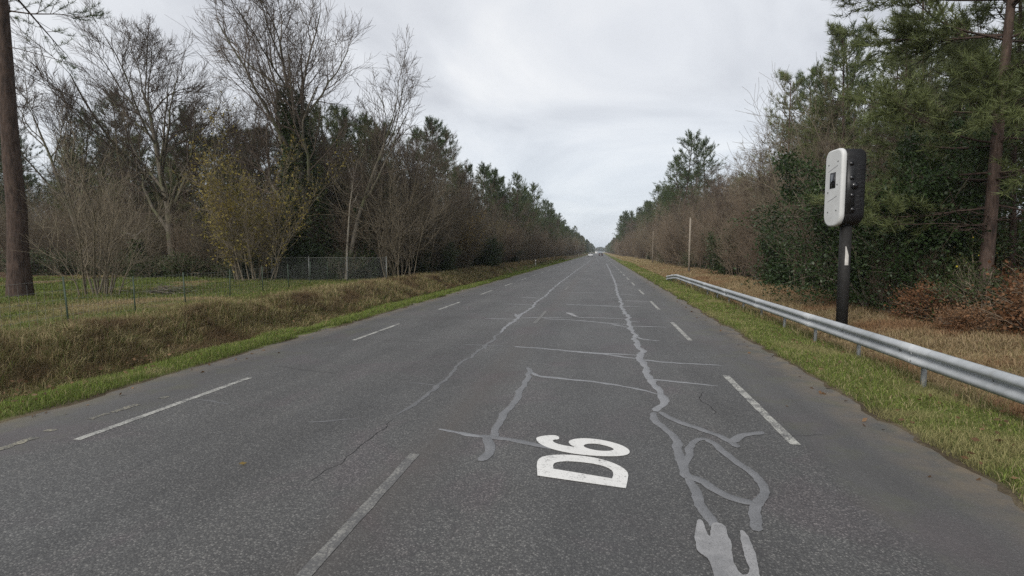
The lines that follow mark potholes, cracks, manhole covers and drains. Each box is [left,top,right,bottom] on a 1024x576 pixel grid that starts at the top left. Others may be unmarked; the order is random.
crack [312,419,393,480]
